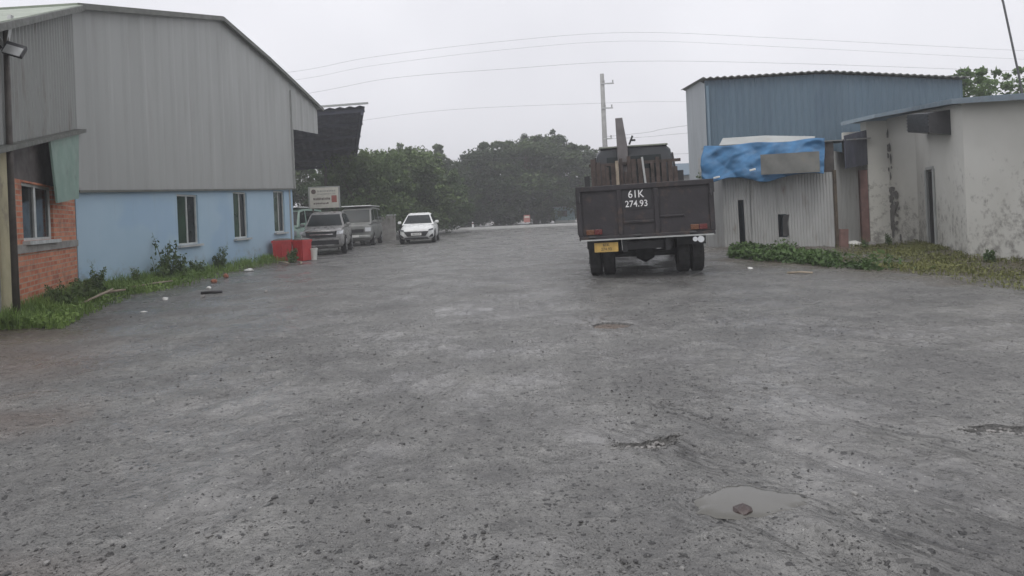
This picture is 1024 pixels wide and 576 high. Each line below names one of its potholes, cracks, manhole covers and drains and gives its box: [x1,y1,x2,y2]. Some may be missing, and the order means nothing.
pothole [947,422,1024,436]
pothole [604,433,685,451]
pothole [694,485,808,520]
pothole [588,321,637,330]
